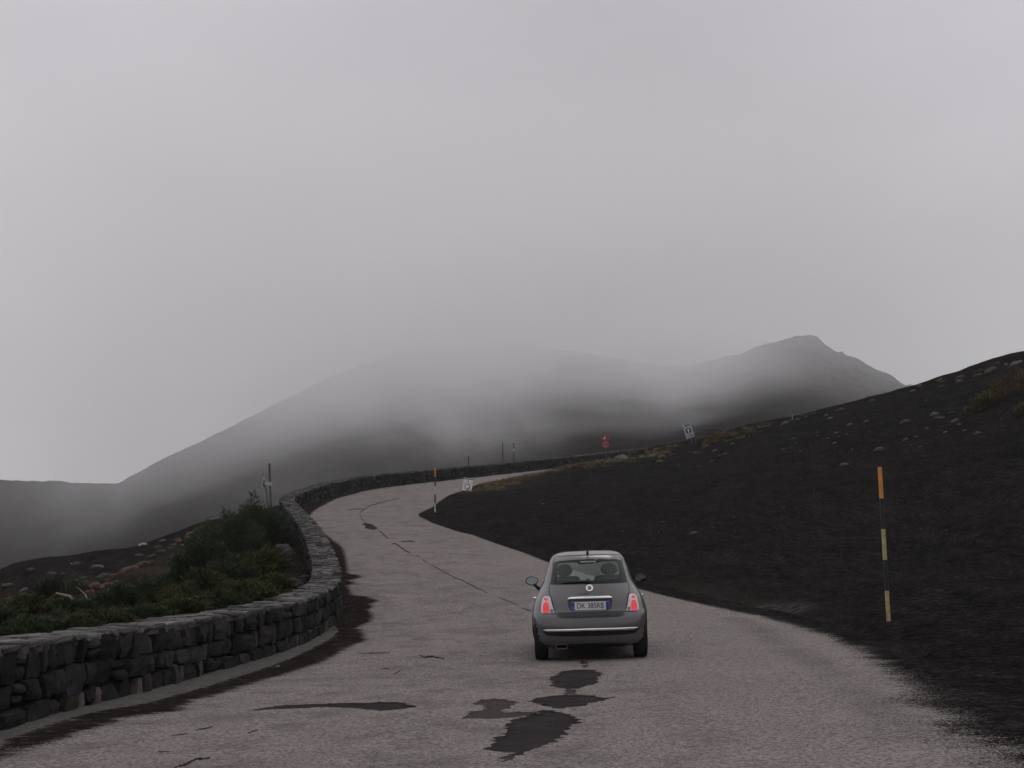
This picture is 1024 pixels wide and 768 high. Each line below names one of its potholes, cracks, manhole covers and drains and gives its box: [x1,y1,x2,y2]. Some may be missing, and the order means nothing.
crack [158,751,211,768]
